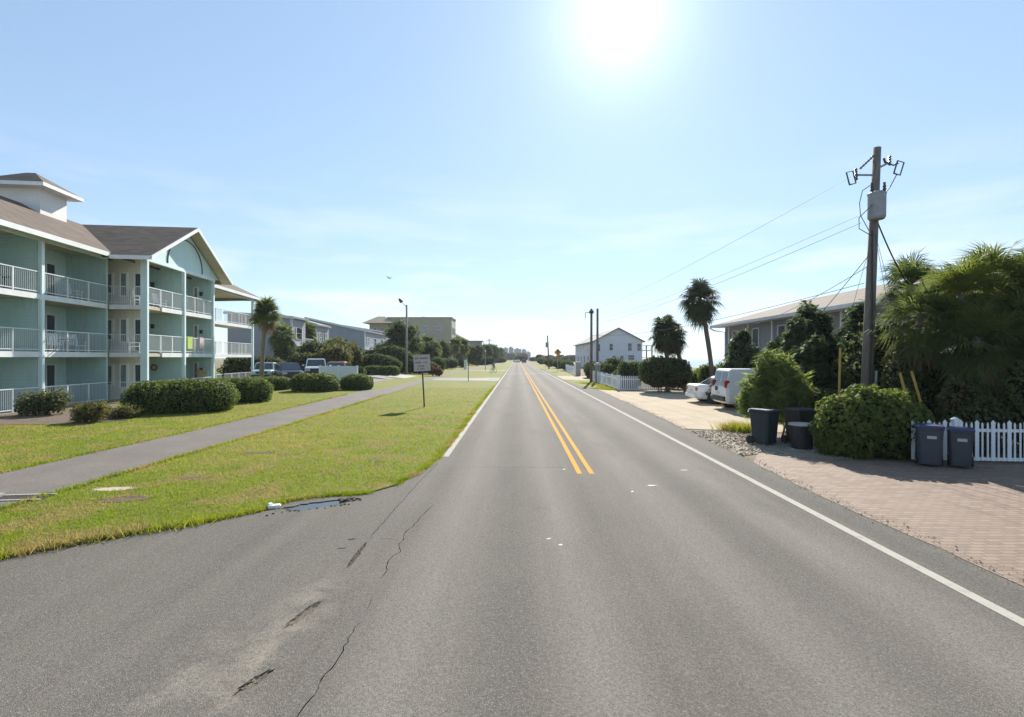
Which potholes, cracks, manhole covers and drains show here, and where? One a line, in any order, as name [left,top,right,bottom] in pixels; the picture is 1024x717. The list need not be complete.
crack [297,507,431,717]
drain grate [0,493,58,501]
